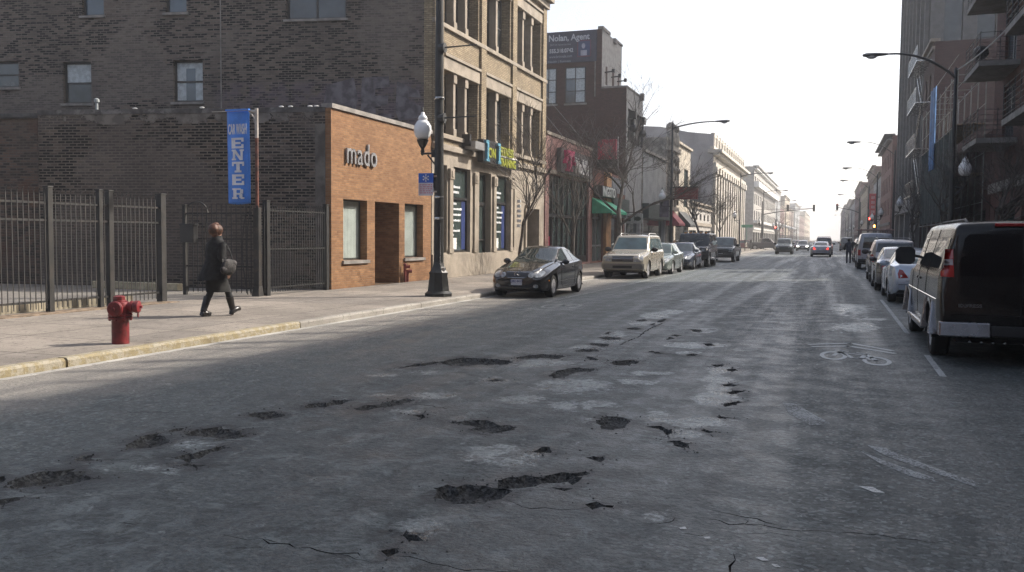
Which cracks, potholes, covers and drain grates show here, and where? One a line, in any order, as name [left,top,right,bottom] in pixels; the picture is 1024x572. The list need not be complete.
pothole [656,437,699,453]
crack [646,510,959,543]
pothole [166,445,230,471]
crack [217,535,368,561]
pothole [238,408,299,420]
pothole [590,414,641,434]
pothole [348,396,430,411]
pothole [292,396,352,412]
pothole [394,356,513,369]
crack [403,556,519,572]
pothole [3,469,120,492]
pothole [549,368,596,379]
